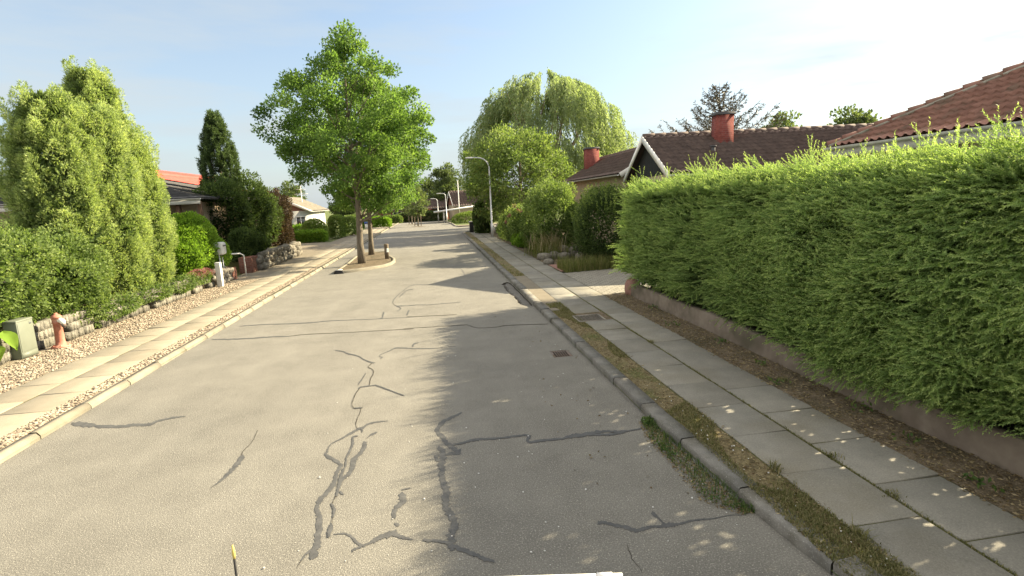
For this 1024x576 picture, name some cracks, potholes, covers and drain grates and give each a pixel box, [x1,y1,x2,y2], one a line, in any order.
crack [212,430,258,487]
drain grate [550,350,572,358]
crack [212,284,533,340]
